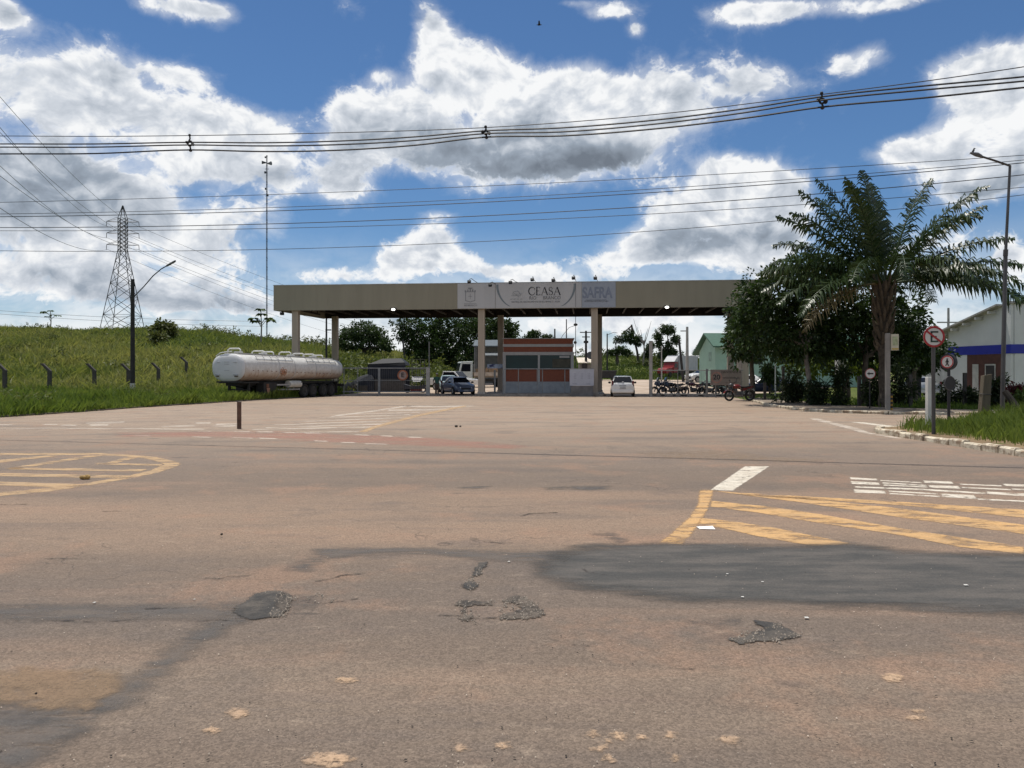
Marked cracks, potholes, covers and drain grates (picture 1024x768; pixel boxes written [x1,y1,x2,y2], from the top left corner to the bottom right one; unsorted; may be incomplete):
pothole [729,620,801,644]
pothole [233,591,291,619]
pothole [455,600,493,621]
pothole [501,595,545,619]
